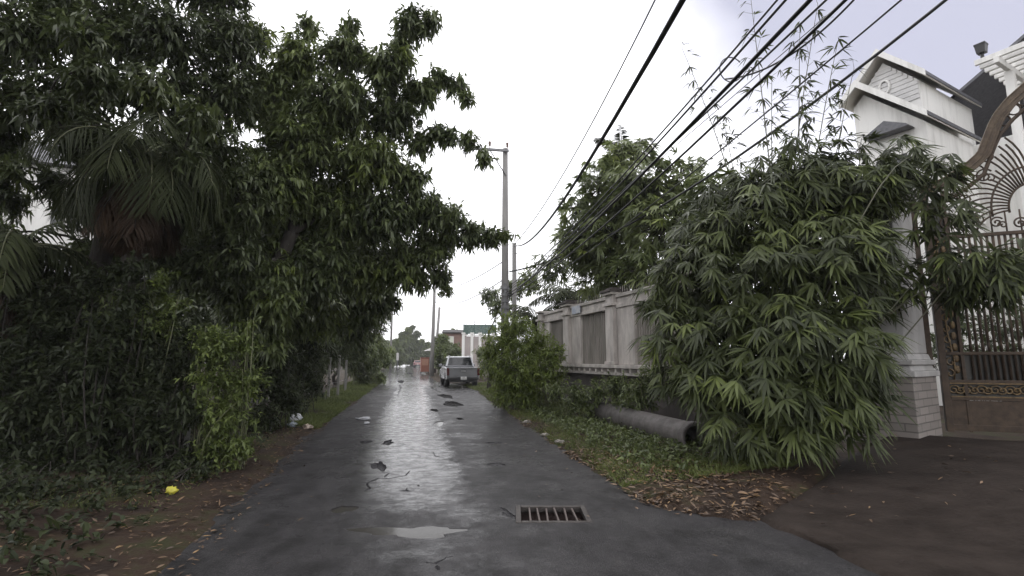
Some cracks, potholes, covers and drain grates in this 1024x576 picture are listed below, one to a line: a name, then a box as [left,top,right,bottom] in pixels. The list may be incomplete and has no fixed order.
crack [365,471,420,491]
drain grate [516,505,593,523]
pothole [370,461,387,471]
pothole [343,526,470,539]
